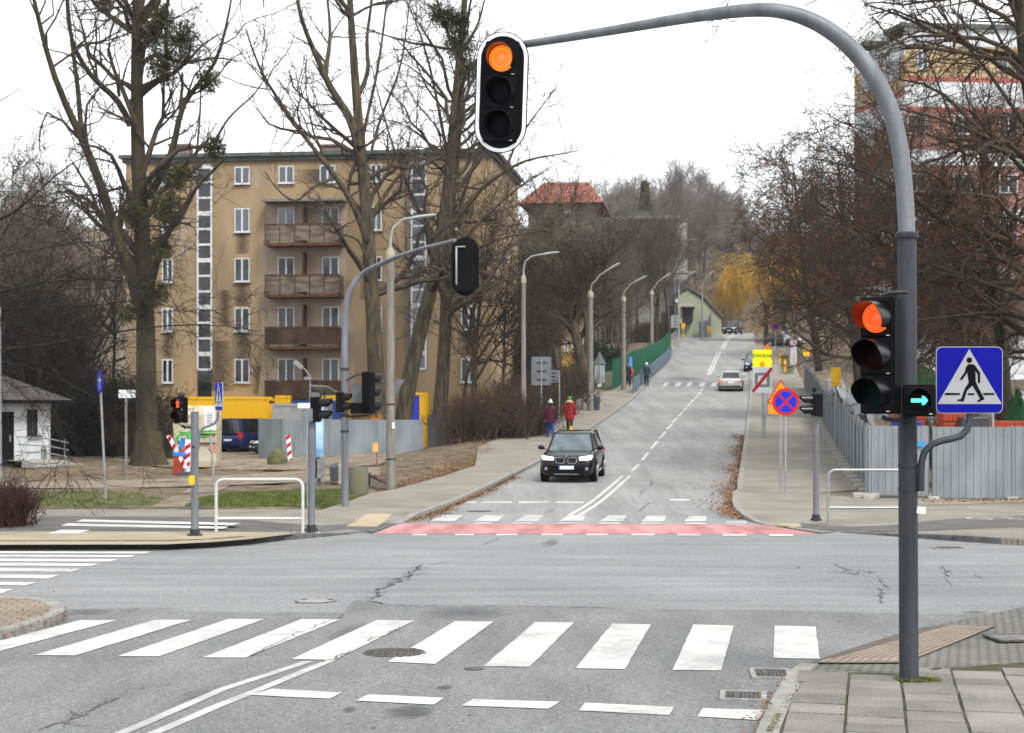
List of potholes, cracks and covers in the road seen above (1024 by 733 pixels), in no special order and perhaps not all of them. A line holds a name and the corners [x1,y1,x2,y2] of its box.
crack [364,562,442,599]
crack [39,696,119,730]
manhole cover [363,648,423,657]
drain grate [719,690,767,702]
crack [250,612,343,656]
drain grate [749,668,790,679]
crack [828,564,889,602]
